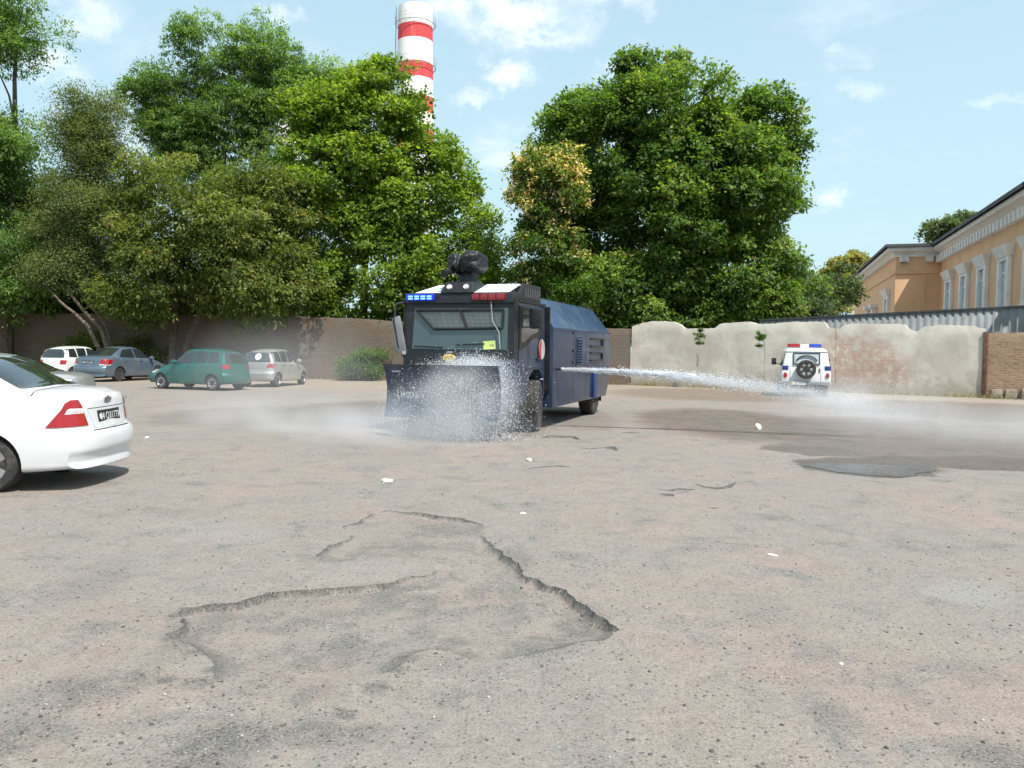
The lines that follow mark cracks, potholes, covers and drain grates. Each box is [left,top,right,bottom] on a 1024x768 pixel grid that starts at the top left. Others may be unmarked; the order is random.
crack [527,432,640,469]
pothole [165,510,620,690]
crack [660,482,736,509]
